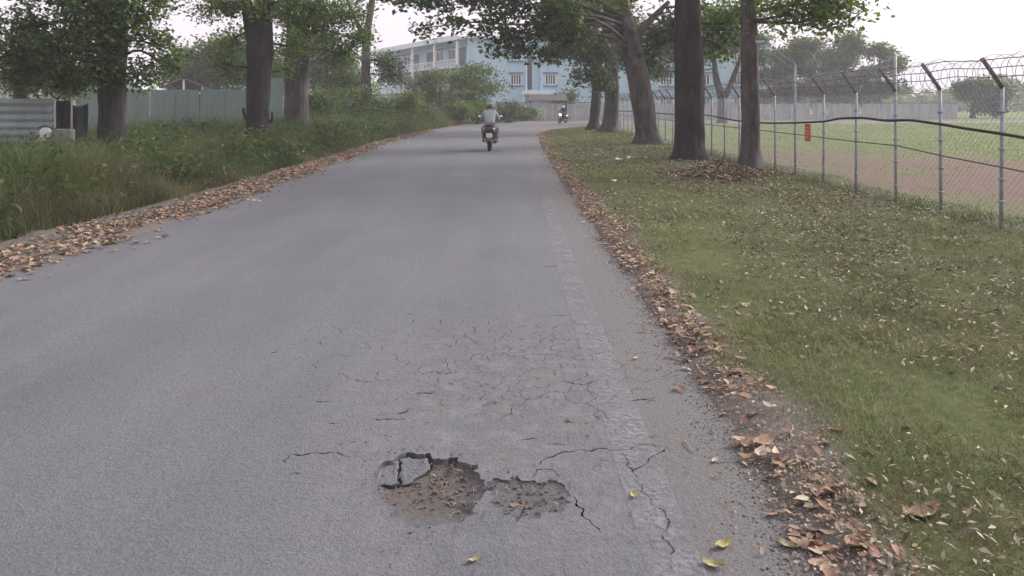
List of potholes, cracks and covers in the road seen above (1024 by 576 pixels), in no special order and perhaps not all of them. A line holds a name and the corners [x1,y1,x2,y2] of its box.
crack [517,438,675,571]
pothole [475,471,583,521]
crack [299,318,668,423]
pothole [360,446,504,544]
